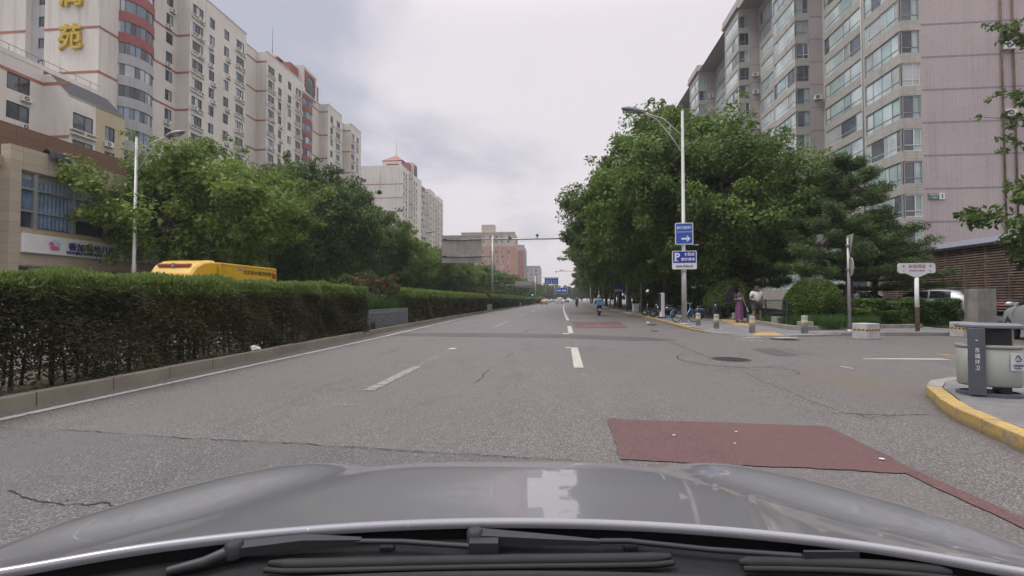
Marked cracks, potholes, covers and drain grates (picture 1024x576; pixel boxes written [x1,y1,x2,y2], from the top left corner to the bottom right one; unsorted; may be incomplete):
crack [8,490,114,507]
crack [806,410,928,419]
